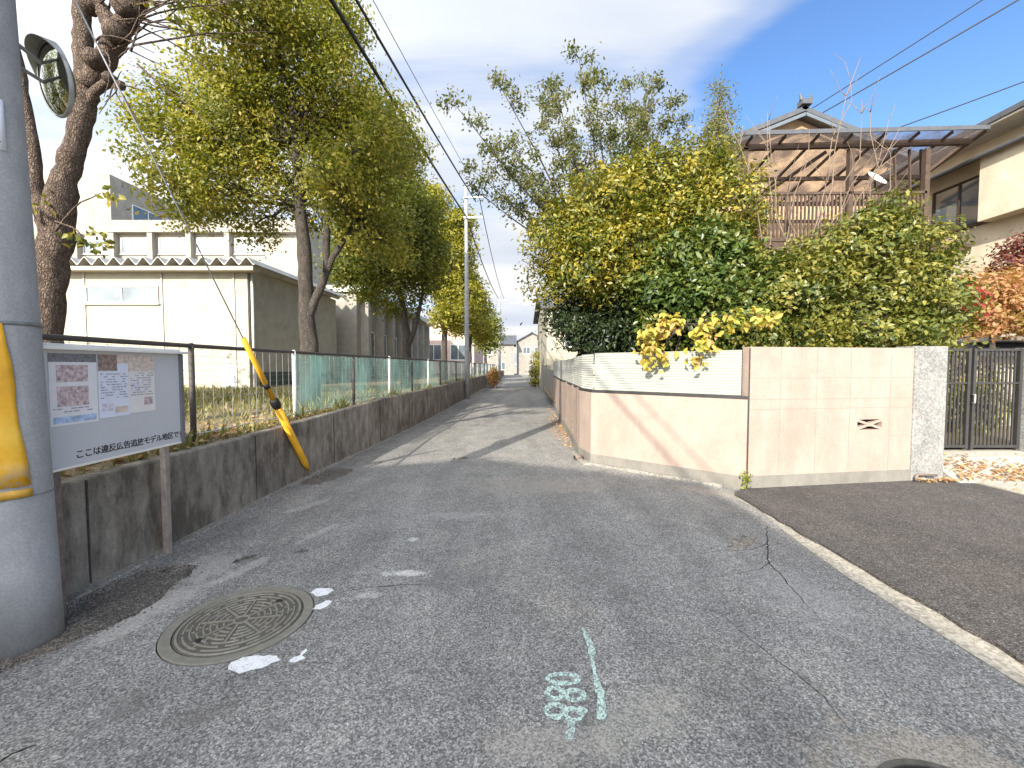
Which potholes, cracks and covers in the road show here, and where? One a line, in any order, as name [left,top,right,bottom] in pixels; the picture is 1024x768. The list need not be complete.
crack [721,613,852,732]
crack [694,526,816,615]
manhole cover [157,586,314,667]
